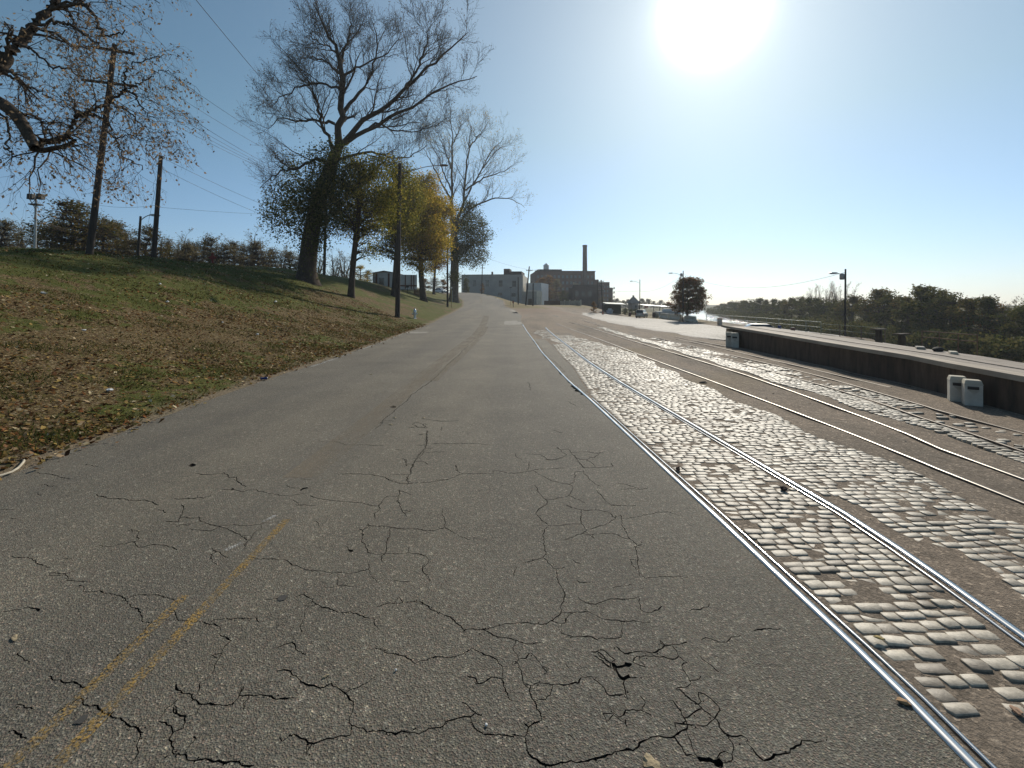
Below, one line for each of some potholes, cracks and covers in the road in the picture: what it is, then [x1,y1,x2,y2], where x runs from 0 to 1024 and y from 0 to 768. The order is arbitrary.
pothole [611,662,632,681]
pothole [697,756,723,768]
crack [11,345,827,767]
